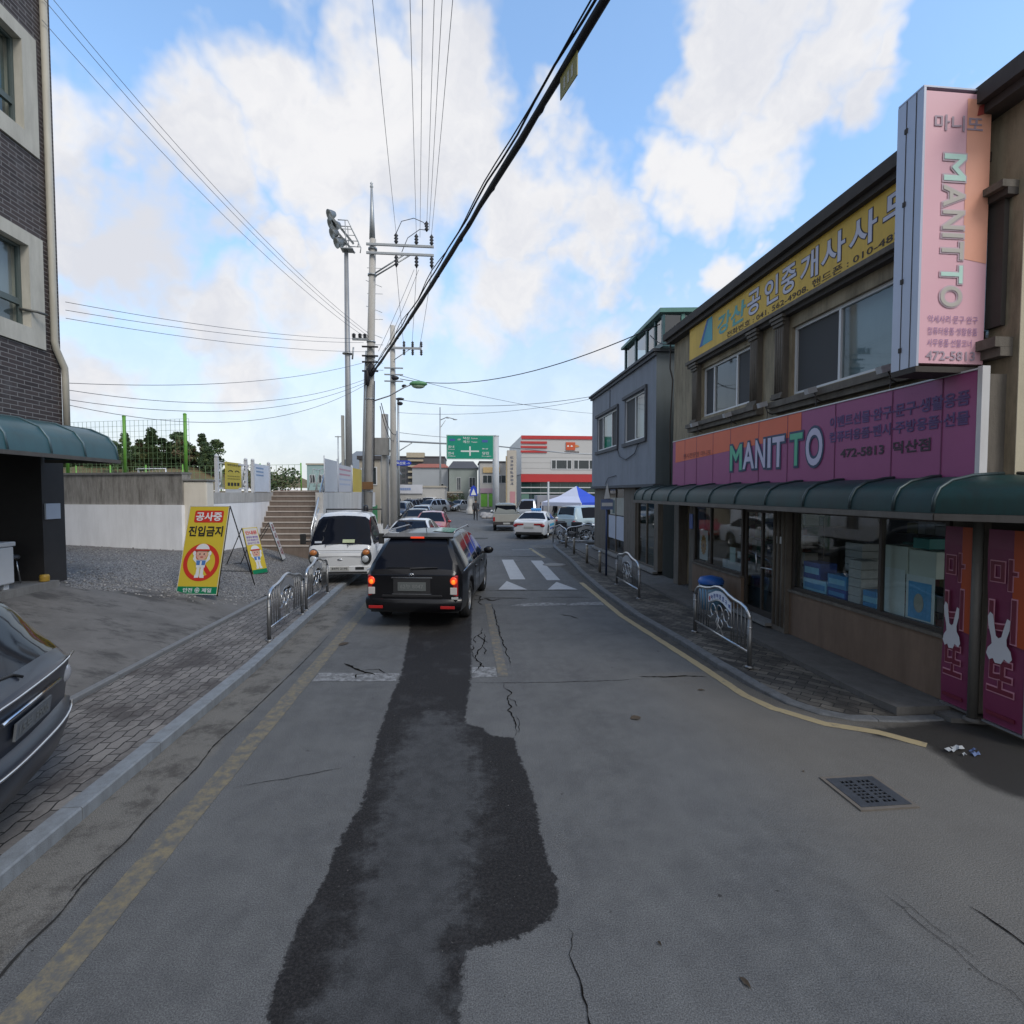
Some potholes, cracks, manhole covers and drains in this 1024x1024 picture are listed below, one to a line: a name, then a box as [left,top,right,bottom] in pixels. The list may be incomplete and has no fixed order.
crack [472,595,705,736]
drain grate [819,774,920,812]
crack [569,930,591,1024]
crack [876,887,1024,1004]
crack [344,663,385,678]
